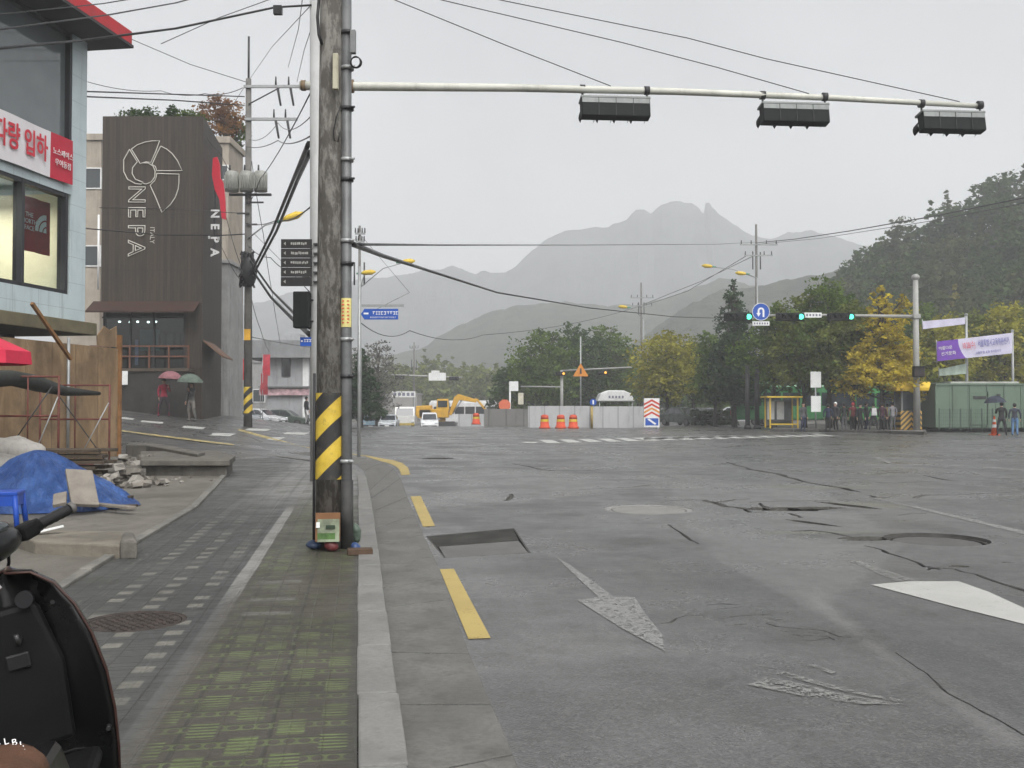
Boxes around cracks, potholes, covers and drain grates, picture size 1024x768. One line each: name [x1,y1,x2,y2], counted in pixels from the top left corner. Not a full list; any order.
crack [669,462,1024,592]
manhole cover [87,611,187,632]
crack [649,603,850,641]
manhole cover [604,505,694,514]
